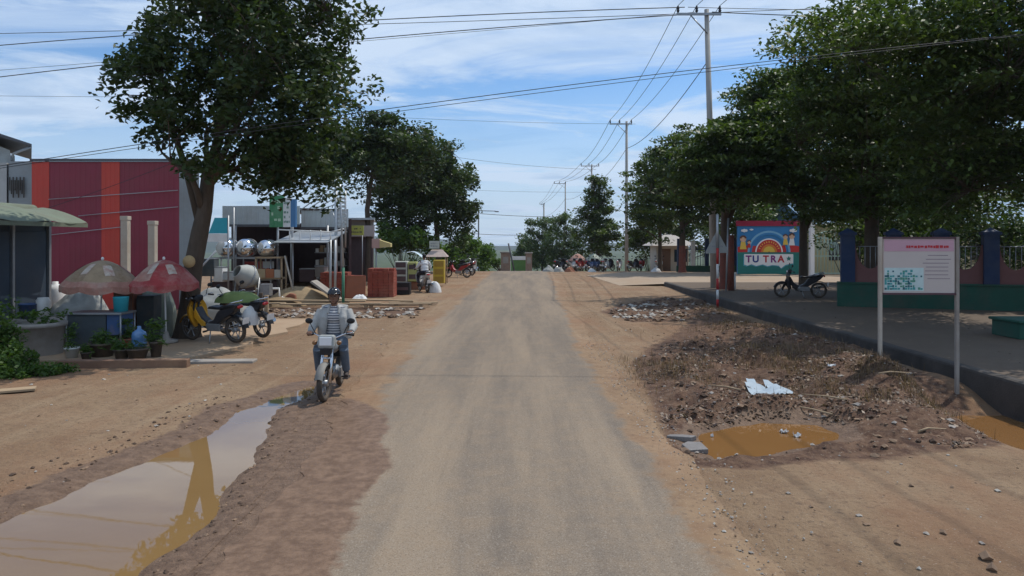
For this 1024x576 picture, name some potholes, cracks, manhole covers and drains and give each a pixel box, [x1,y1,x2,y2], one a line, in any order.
pothole [0,381,337,576]
